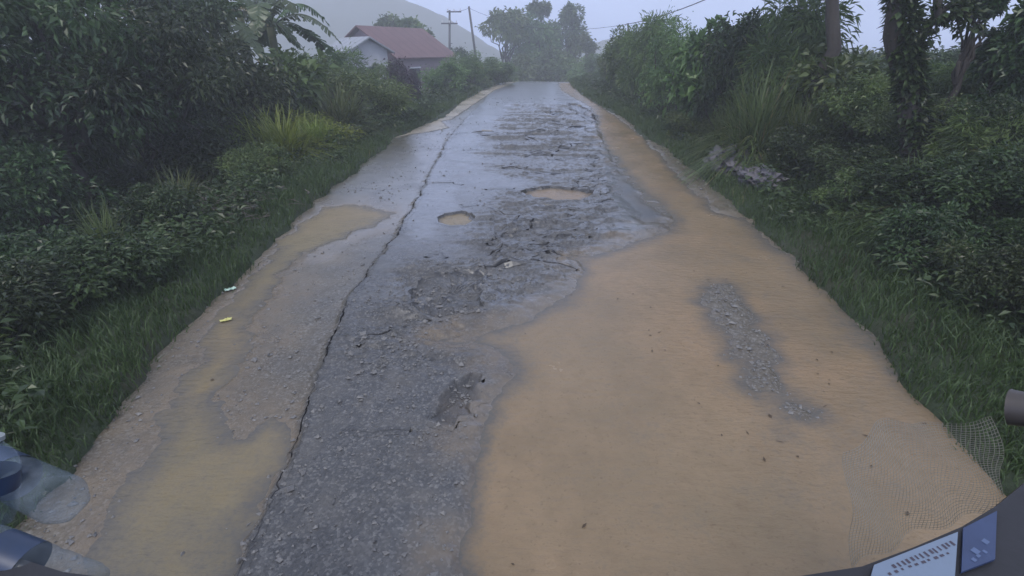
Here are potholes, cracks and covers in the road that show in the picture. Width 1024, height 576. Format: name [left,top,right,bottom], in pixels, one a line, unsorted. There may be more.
pothole [404,266,489,321]
pothole [425,368,490,431]
crack [353,325,405,345]
pothole [517,184,598,202]
crack [341,425,411,438]
crack [448,101,624,271]
pothole [433,209,480,227]
